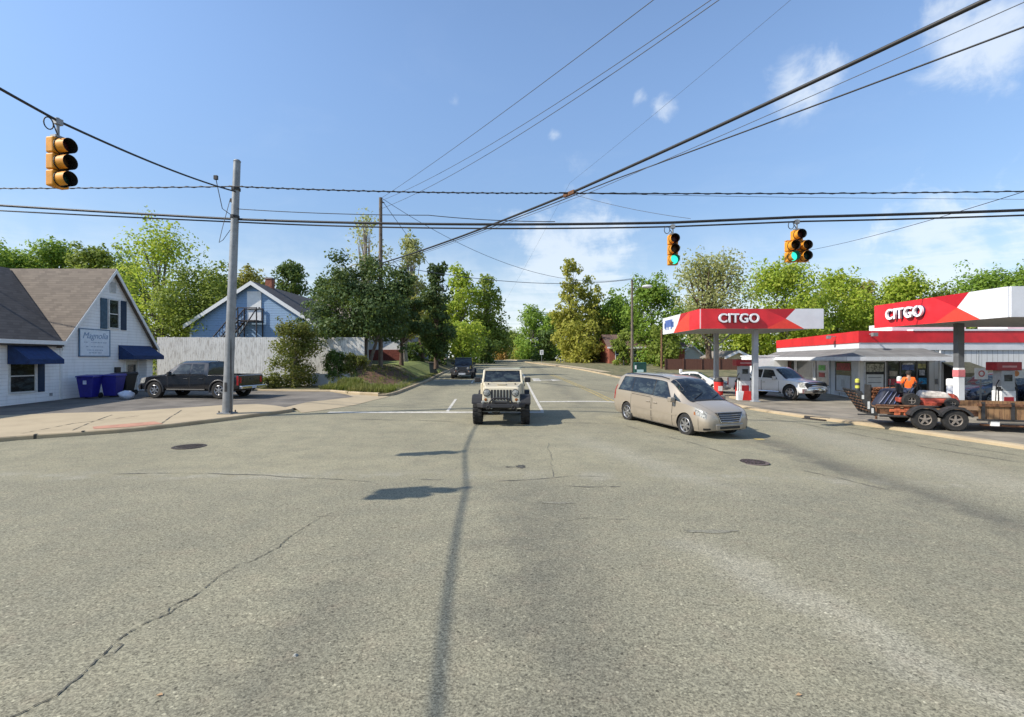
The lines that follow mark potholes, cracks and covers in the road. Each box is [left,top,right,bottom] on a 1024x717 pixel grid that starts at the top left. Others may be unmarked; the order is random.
crack [503,443,621,487]
crack [10,512,349,717]
